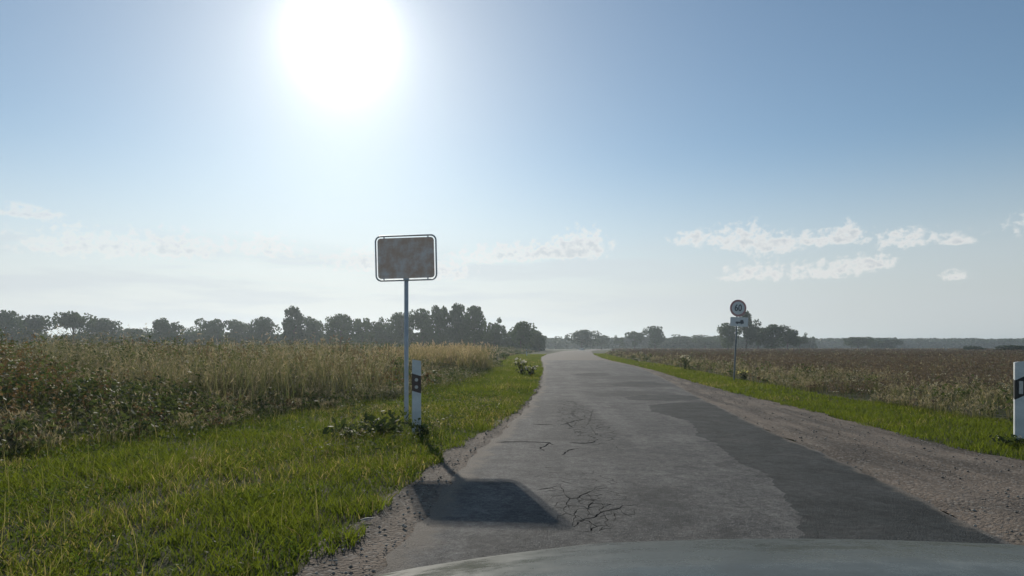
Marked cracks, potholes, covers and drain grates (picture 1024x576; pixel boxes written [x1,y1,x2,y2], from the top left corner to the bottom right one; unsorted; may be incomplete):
crack [524,401,635,532]
